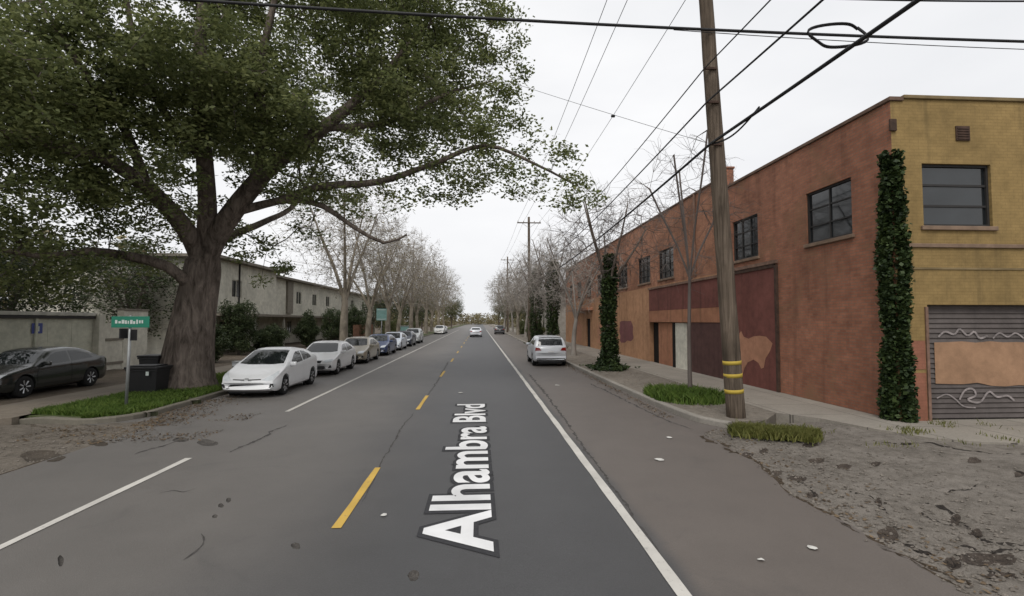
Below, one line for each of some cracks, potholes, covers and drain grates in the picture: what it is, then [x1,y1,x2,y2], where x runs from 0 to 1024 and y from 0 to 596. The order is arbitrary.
pothole [877,526,899,544]
pothole [20,450,66,462]
pothole [944,557,961,570]
crack [700,436,1024,594]
pothole [955,553,1017,566]
